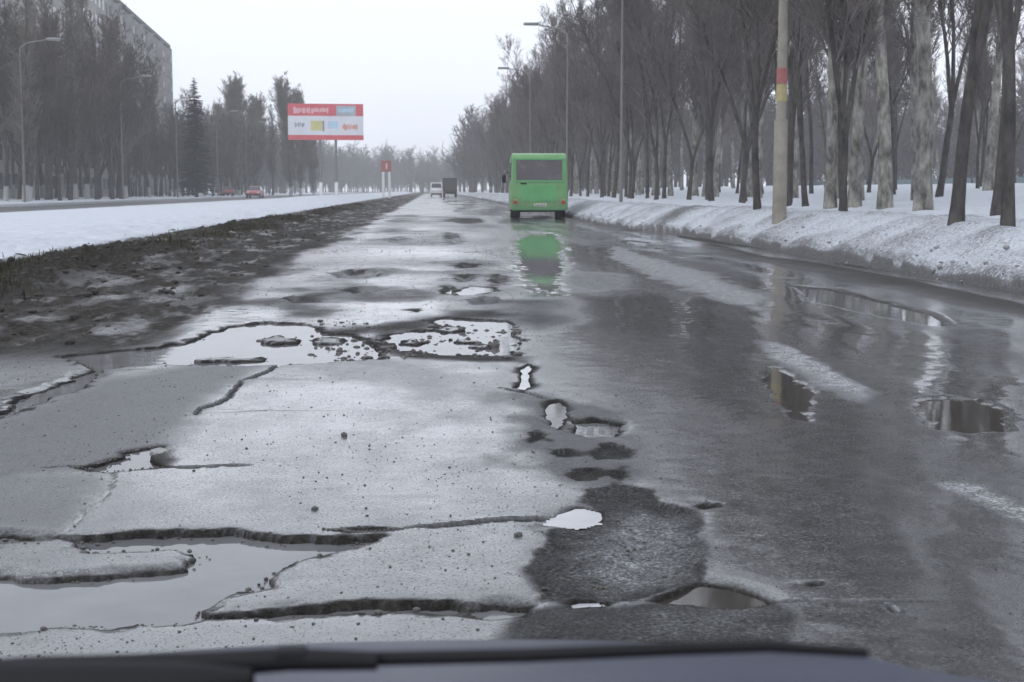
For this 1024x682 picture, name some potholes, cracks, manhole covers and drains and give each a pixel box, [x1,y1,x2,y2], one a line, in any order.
pothole [506,361,542,393]
pothole [0,320,395,419]
pothole [447,285,503,295]
pothole [71,443,177,474]
pothole [537,397,578,431]
pothole [637,577,784,609]
pothole [376,316,537,357]
crack [407,515,549,528]
pothole [0,525,541,635]
pothole [325,269,391,279]
pothole [560,416,634,438]
pothole [435,284,462,294]
